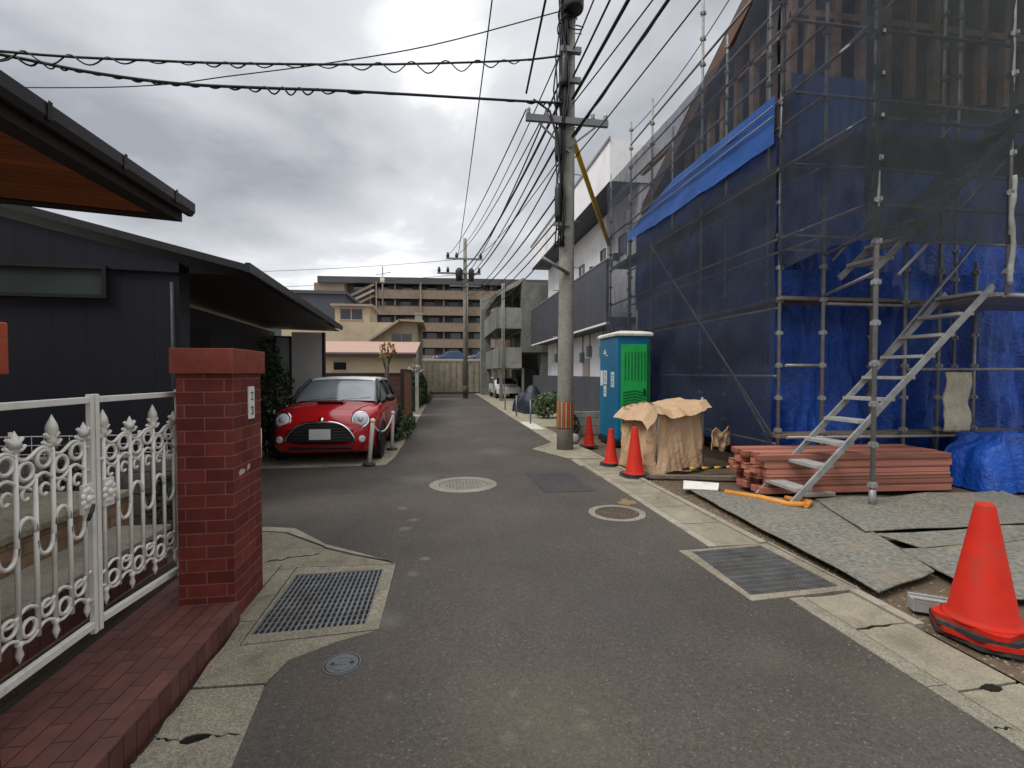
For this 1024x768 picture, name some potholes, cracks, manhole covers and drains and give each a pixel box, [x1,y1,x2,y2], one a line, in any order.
drain grate [241,564,396,646]
manhole cover [429,477,497,493]
drain grate [679,543,855,601]
utility cover [322,652,361,676]
manhole cover [588,505,646,522]
